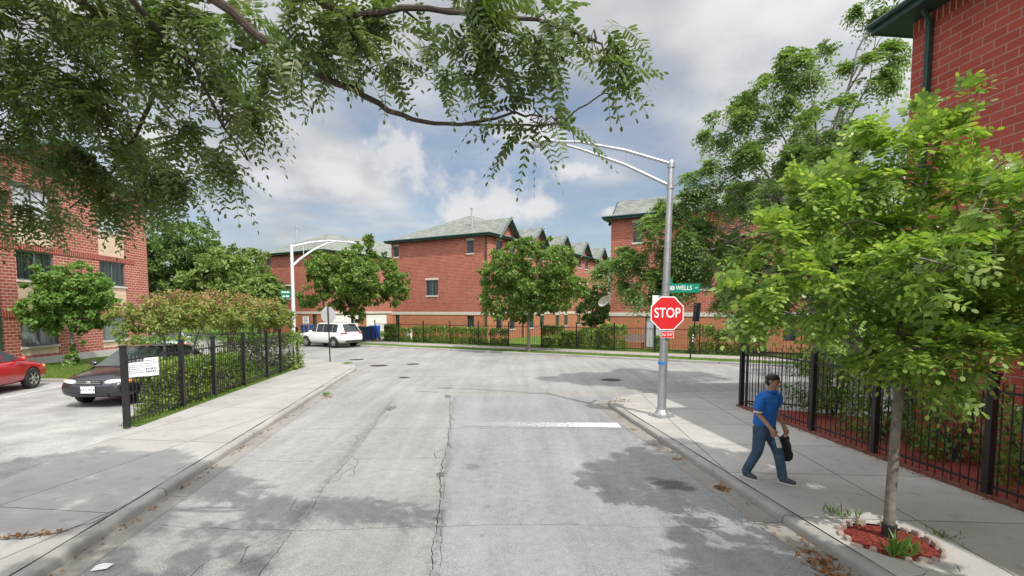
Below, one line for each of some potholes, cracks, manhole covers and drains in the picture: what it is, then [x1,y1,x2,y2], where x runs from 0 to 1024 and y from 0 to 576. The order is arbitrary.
crack [164,376,723,576]
